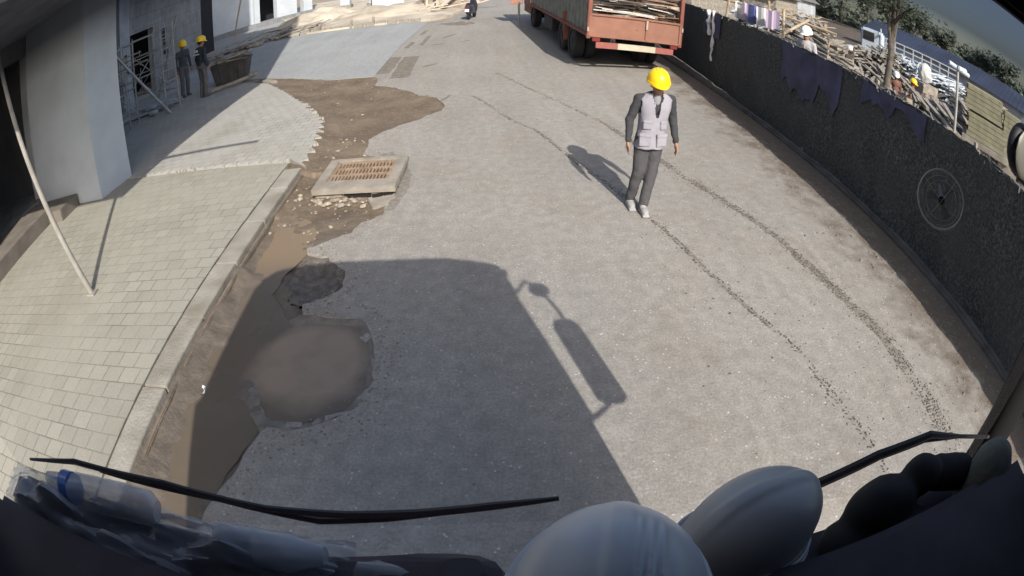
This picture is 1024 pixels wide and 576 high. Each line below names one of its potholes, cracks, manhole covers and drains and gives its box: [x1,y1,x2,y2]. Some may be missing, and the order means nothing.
pothole [285,257,345,306]
pothole [248,315,375,432]
